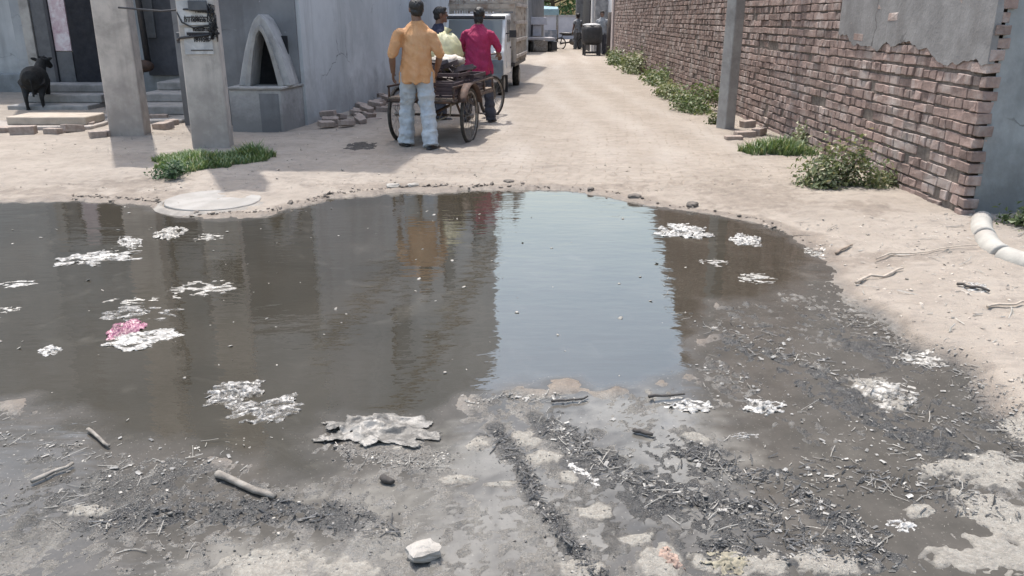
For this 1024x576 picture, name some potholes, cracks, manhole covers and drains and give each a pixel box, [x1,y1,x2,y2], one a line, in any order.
manhole cover [153,190,264,216]
